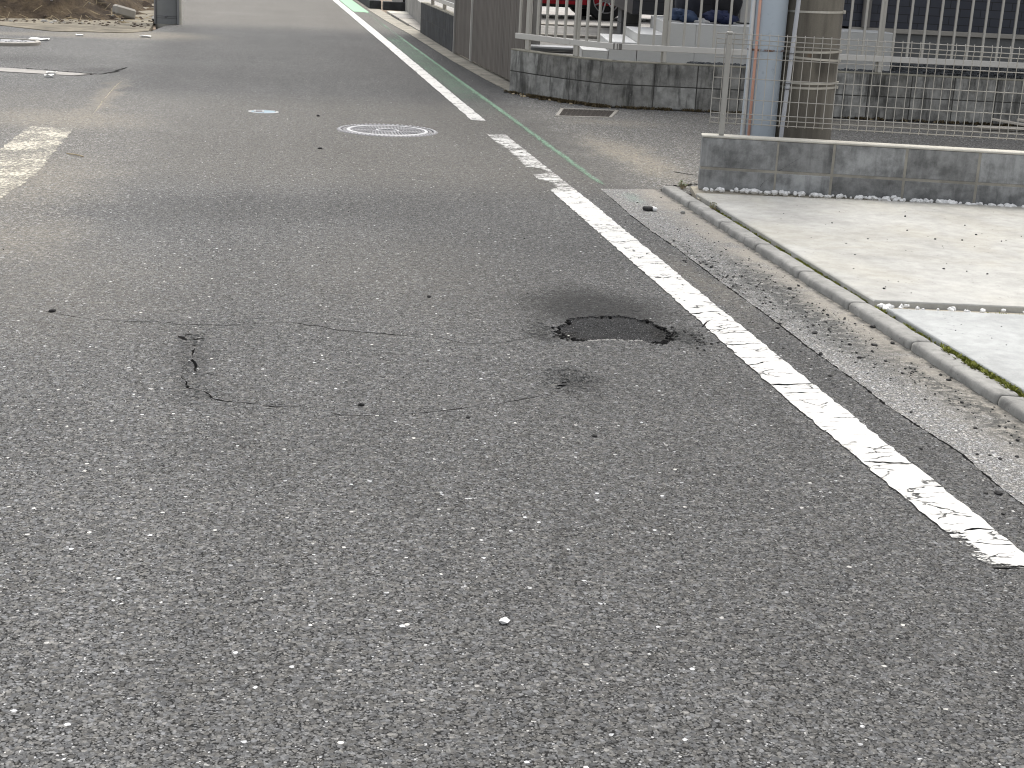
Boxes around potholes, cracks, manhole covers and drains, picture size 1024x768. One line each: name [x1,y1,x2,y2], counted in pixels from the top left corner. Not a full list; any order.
pothole [551,315,681,346]
manhole cover [337,124,438,137]
drain grate [555,108,619,118]
crack [46,311,551,416]
manhole cover [0,38,41,46]
pothole [551,368,596,393]
